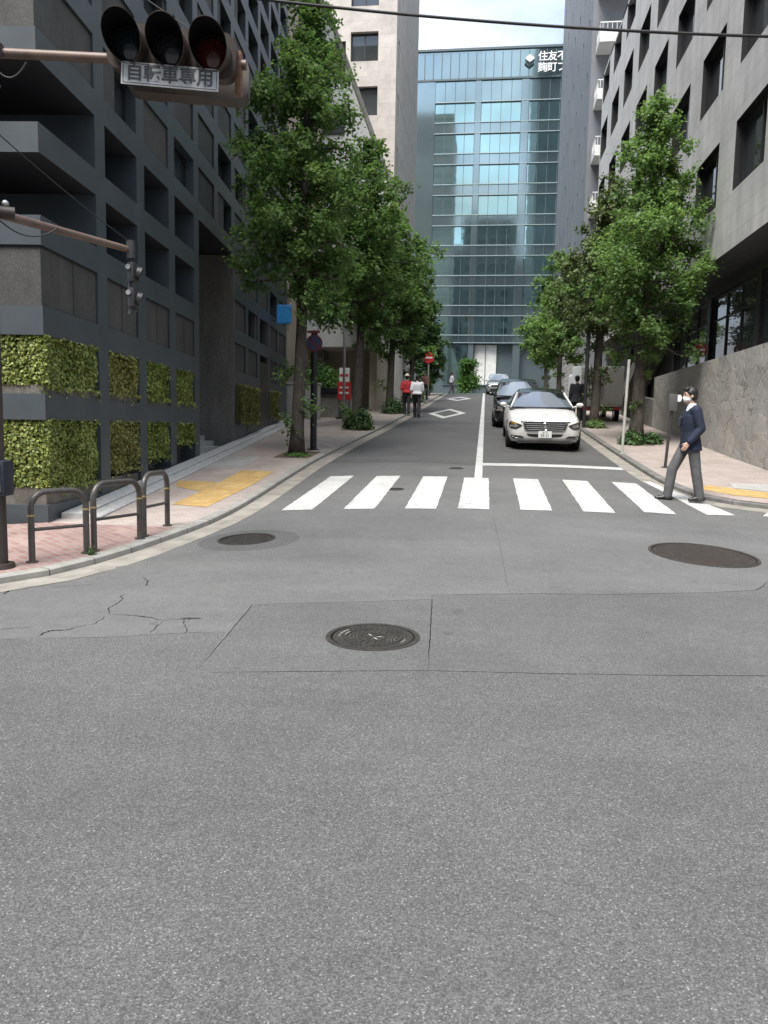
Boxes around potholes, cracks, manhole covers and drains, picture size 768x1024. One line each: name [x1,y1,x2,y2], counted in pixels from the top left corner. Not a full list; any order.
manhole cover [217,533,276,545]
manhole cover [648,542,761,568]
manhole cover [326,623,420,651]
crack [7,595,202,637]
